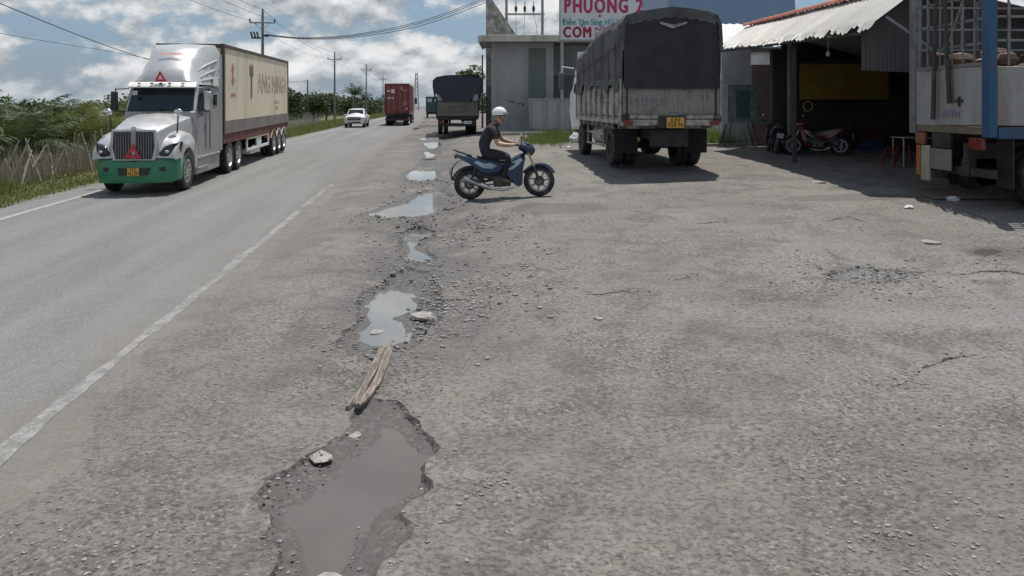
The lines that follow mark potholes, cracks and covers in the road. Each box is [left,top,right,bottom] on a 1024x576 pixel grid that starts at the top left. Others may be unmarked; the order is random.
pothole [420,146,443,160]
pothole [250,398,441,576]
pothole [395,224,437,266]
pothole [400,157,442,182]
pothole [355,190,462,221]
pothole [821,266,925,286]
pothole [335,267,447,357]
pothole [420,141,445,149]
crack [890,354,983,388]
